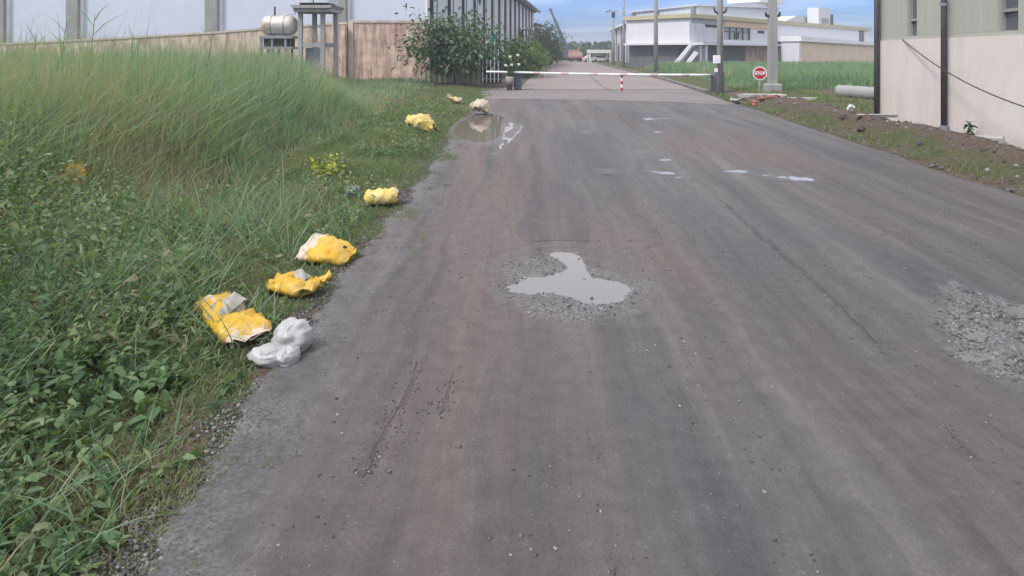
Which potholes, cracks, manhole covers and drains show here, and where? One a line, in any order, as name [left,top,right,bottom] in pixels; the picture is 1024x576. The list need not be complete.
crack [720,200,887,355]
pothole [923,276,1024,391]
pothole [471,244,676,333]
pothole [446,111,527,164]
crack [439,374,453,415]
crack [362,361,418,477]
